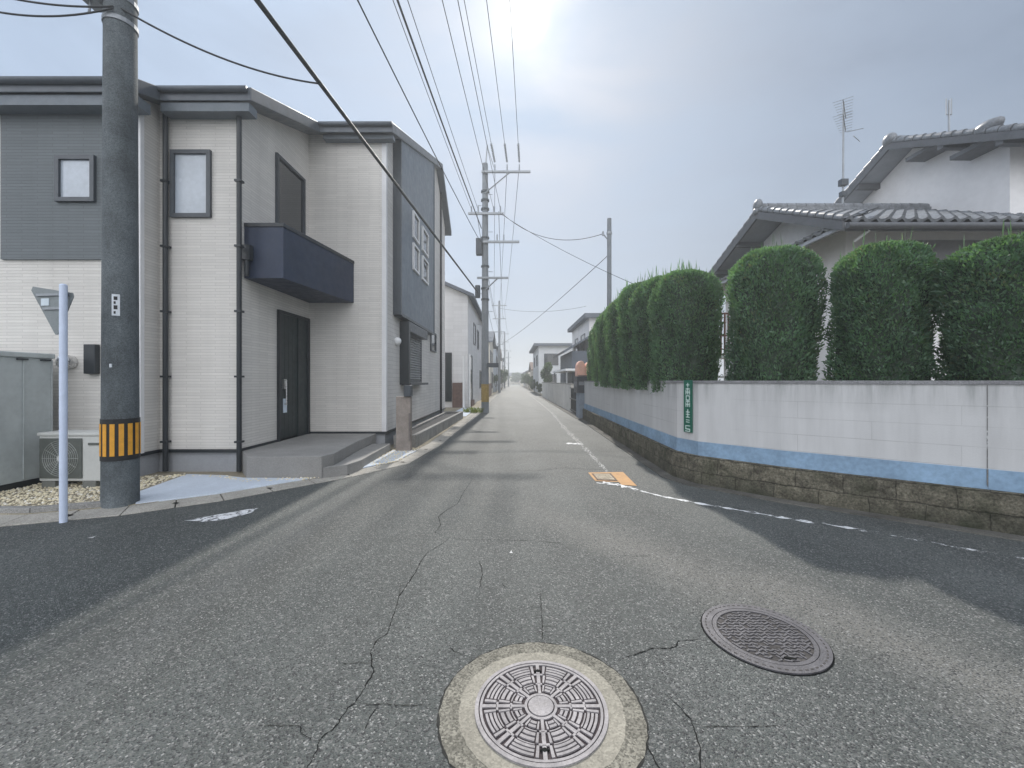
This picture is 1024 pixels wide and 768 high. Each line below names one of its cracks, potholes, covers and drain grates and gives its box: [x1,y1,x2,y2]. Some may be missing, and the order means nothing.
crack [261,480,556,768]
crack [672,700,775,768]
manhole cover [436,642,649,768]
manhole cover [700,604,835,676]
